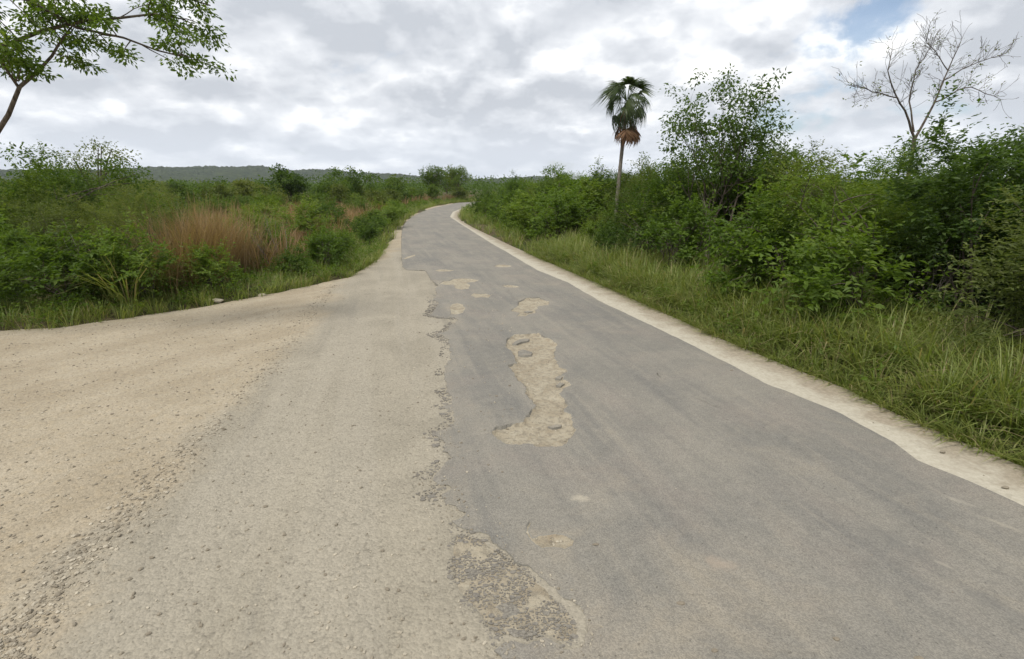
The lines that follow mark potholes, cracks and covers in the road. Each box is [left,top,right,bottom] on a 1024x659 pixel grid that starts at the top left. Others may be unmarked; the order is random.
pothole [491,333,577,447]
pothole [439,278,478,290]
pothole [449,303,466,314]
pothole [511,297,550,316]
pothole [447,527,578,648]
pothole [525,521,575,550]
